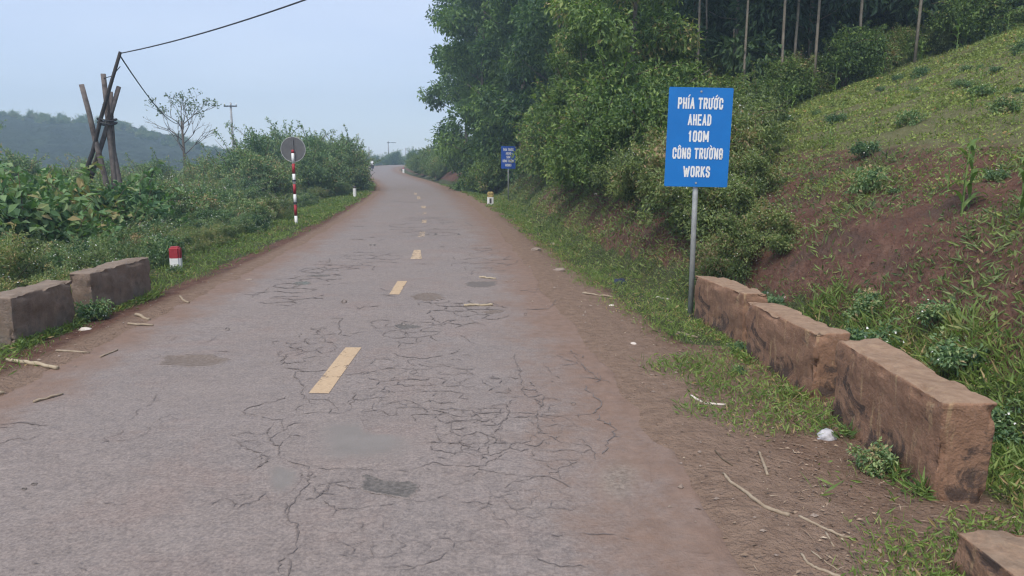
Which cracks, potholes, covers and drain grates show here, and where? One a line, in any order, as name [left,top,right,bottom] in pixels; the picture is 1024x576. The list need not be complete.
crack [250,201,518,306]
crack [212,299,620,575]
